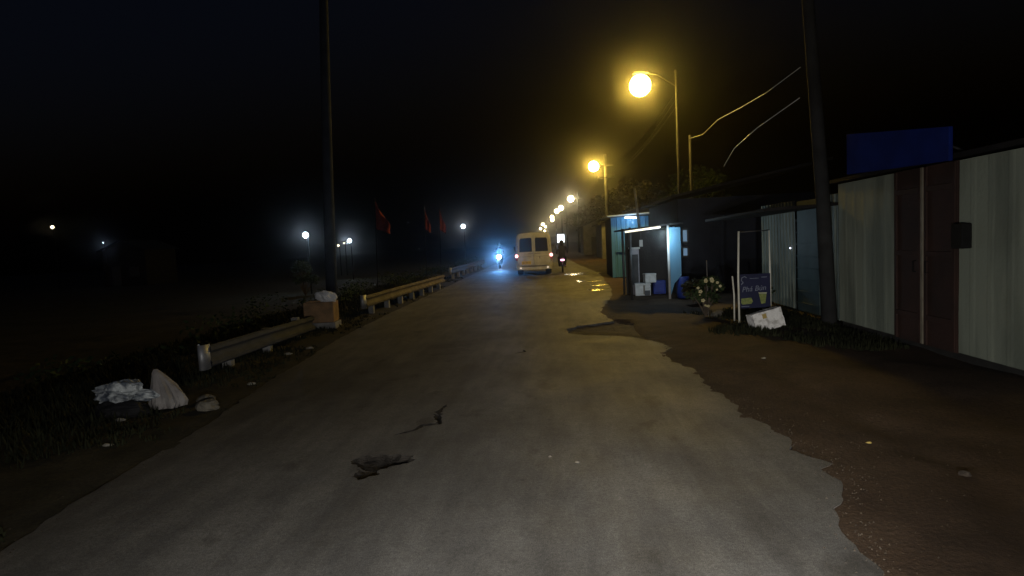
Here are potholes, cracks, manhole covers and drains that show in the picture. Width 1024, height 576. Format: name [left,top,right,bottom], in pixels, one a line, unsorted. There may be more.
crack [396,404,447,435]
pothole [351,454,415,480]
